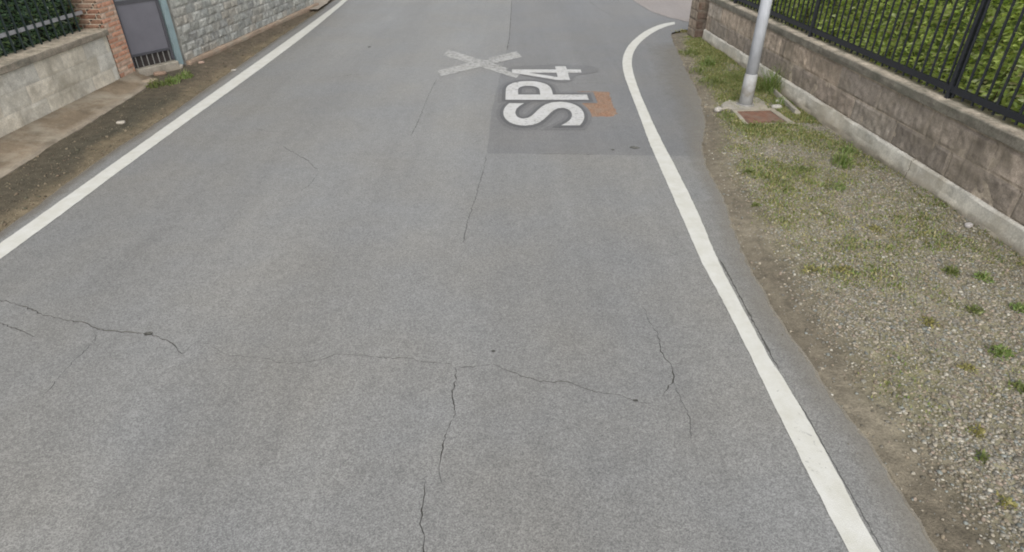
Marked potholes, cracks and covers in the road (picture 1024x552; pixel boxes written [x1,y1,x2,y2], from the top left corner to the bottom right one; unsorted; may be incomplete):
crack [267,354,651,552]
manhole cover [731,108,796,125]
crack [645,310,691,440]
crack [0,300,244,390]
